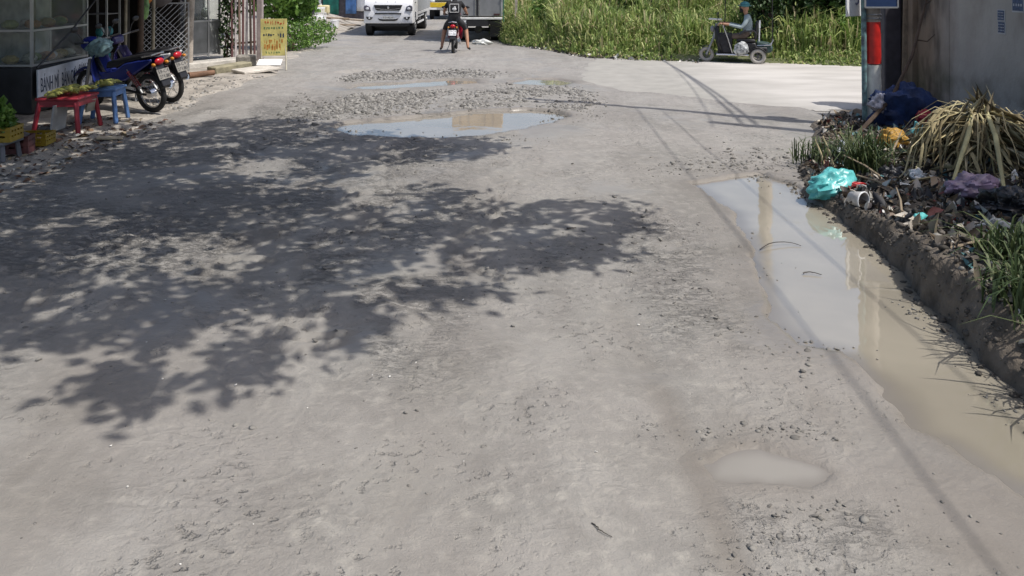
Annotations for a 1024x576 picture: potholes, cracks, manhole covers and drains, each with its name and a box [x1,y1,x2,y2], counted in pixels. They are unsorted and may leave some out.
pothole [327,77,495,92]
pothole [678,169,1024,518]
pothole [493,76,591,87]
pothole [313,106,587,144]
